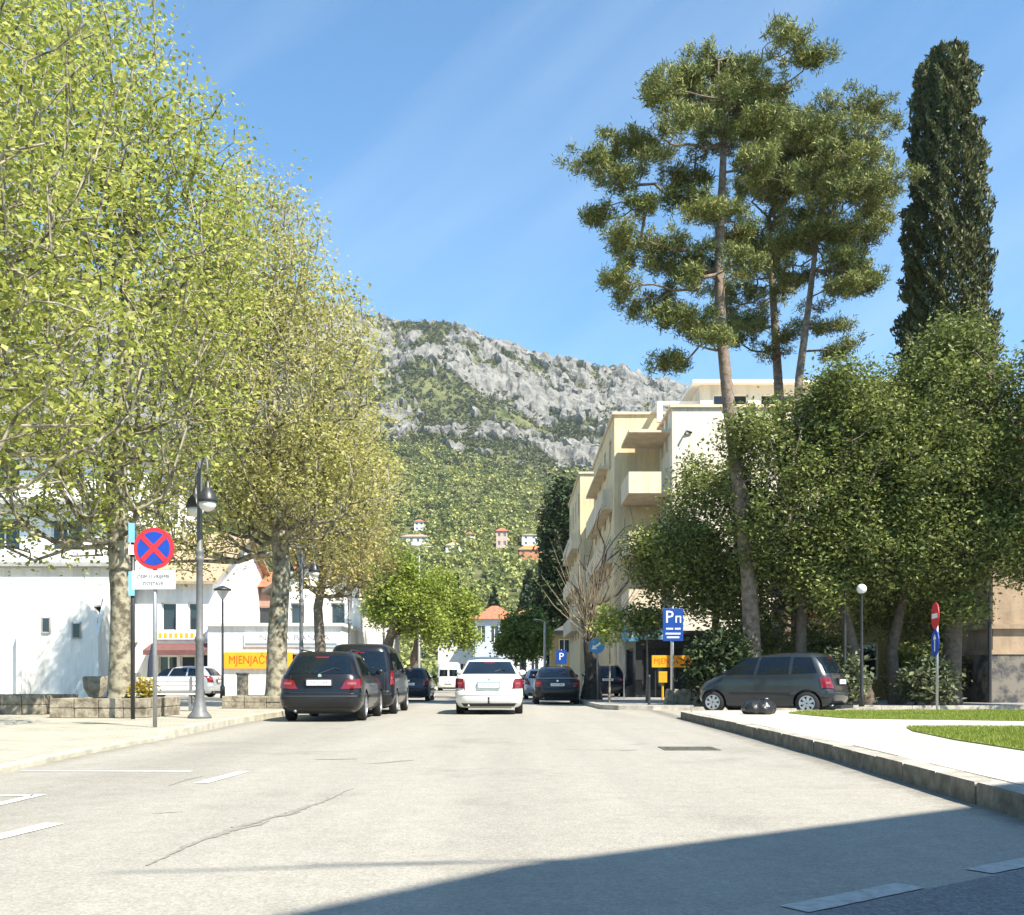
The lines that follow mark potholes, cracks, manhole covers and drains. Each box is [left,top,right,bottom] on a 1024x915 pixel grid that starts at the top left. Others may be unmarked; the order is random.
crack [146,775,350,865]
